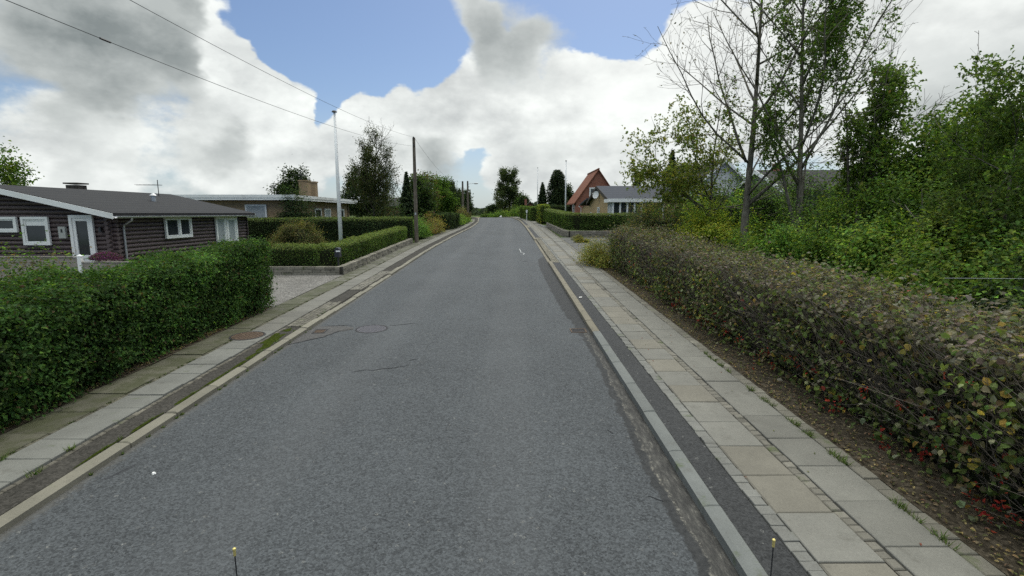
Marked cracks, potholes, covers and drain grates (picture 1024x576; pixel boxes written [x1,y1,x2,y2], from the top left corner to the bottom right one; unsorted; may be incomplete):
manhole cover [229,331,266,341]
manhole cover [355,325,388,333]
